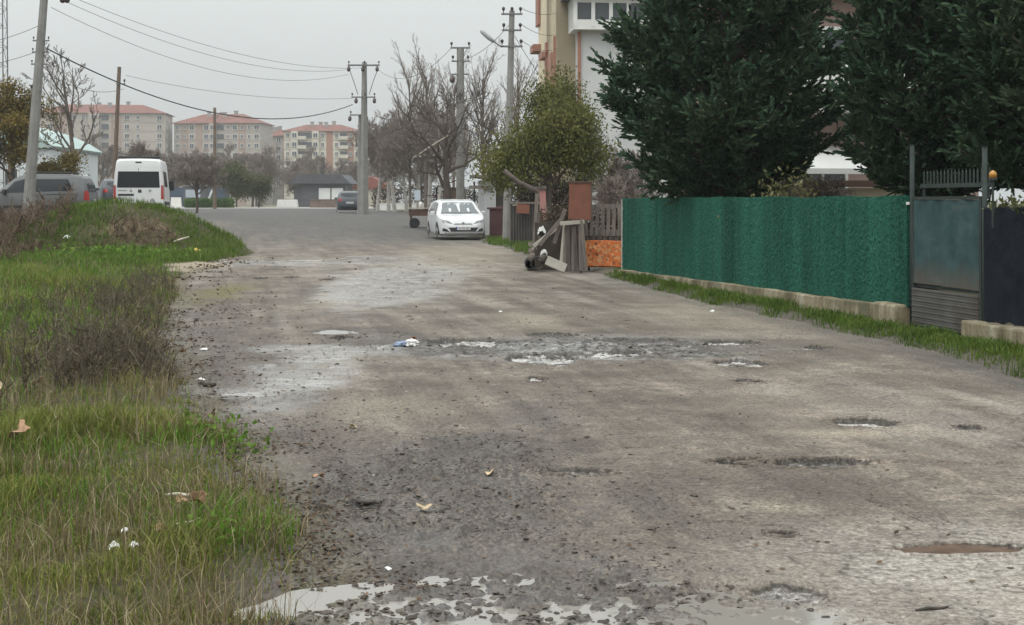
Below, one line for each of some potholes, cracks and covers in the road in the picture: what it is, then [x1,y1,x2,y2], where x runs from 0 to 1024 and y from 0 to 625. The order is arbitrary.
pothole [700,357,781,369]
pothole [337,498,387,513]
pothole [733,456,899,469]
pothole [571,348,662,360]
pothole [419,336,512,350]
pothole [946,423,986,432]
pothole [740,578,838,609]
pothole [869,540,1024,557]
pothole [496,349,593,369]
pothole [576,336,705,345]
pothole [821,415,913,429]
